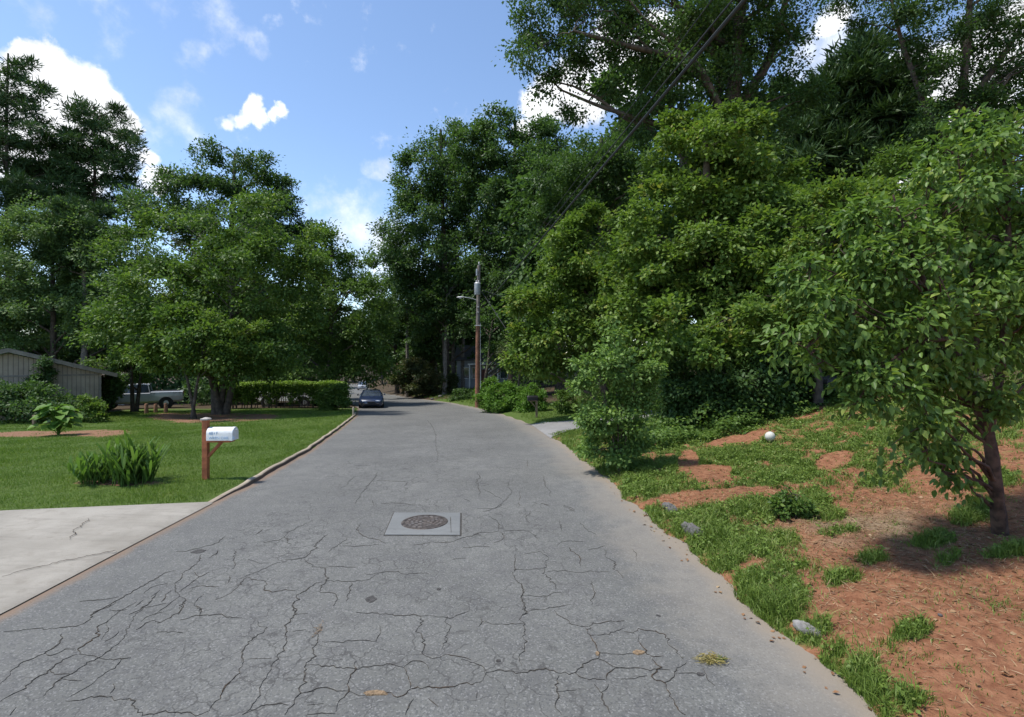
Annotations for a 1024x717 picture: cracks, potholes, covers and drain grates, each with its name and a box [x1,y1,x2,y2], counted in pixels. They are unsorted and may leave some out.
manhole cover [383,512,462,536]
crack [0,474,714,716]
